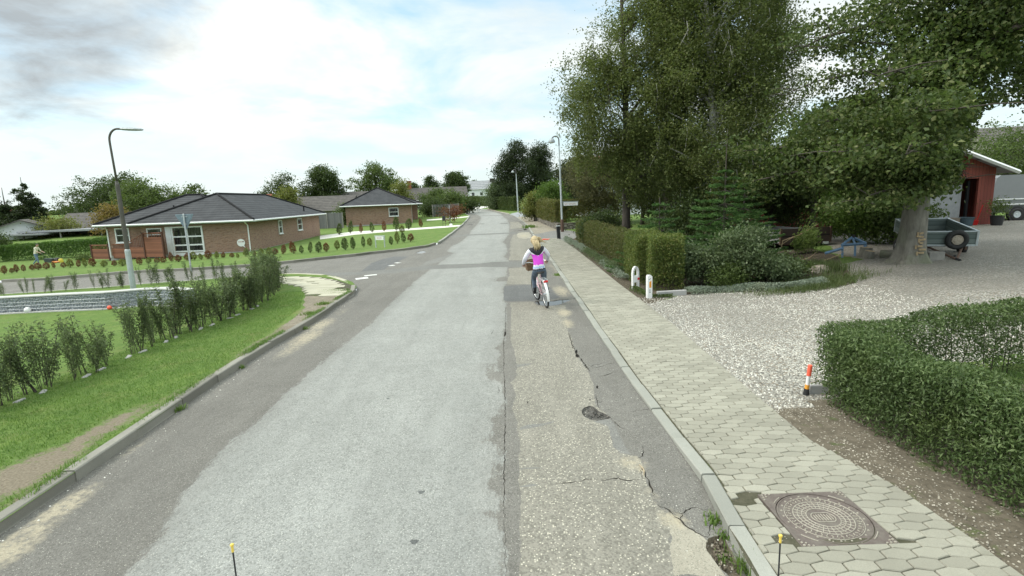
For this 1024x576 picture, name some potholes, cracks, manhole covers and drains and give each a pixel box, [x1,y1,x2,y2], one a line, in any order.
pothole [582,406,611,421]
crack [553,450,712,538]
crack [569,335,613,377]
manhole cover [757,491,899,547]
